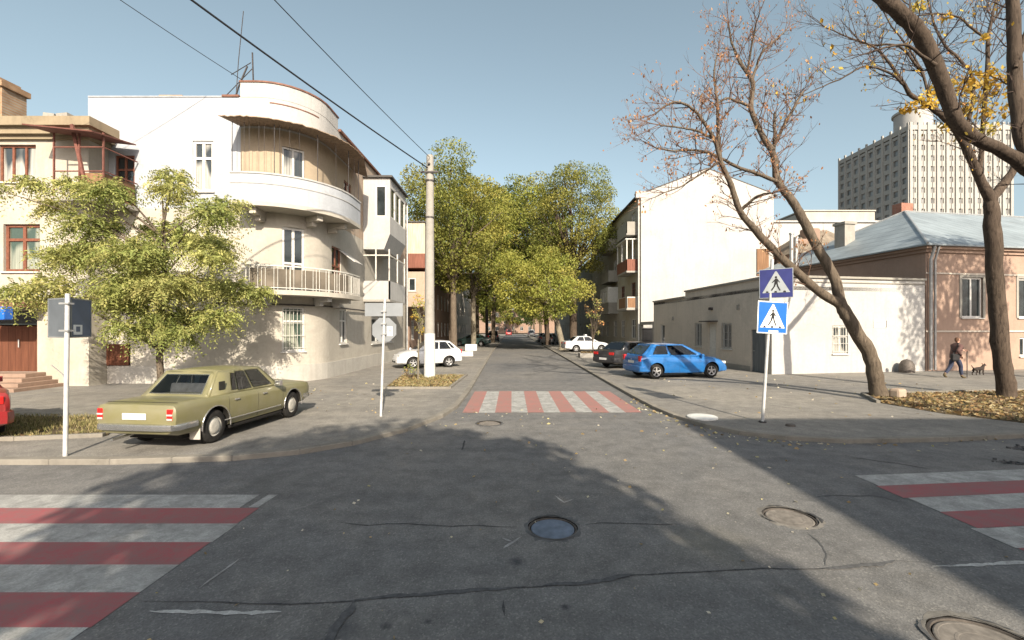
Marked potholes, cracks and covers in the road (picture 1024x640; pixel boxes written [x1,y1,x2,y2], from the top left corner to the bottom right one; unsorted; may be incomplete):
manhole cover [524,515,581,542]
manhole cover [756,504,826,530]
manhole cover [914,610,1024,640]
manhole cover [686,413,718,421]
crack [162,534,929,640]
